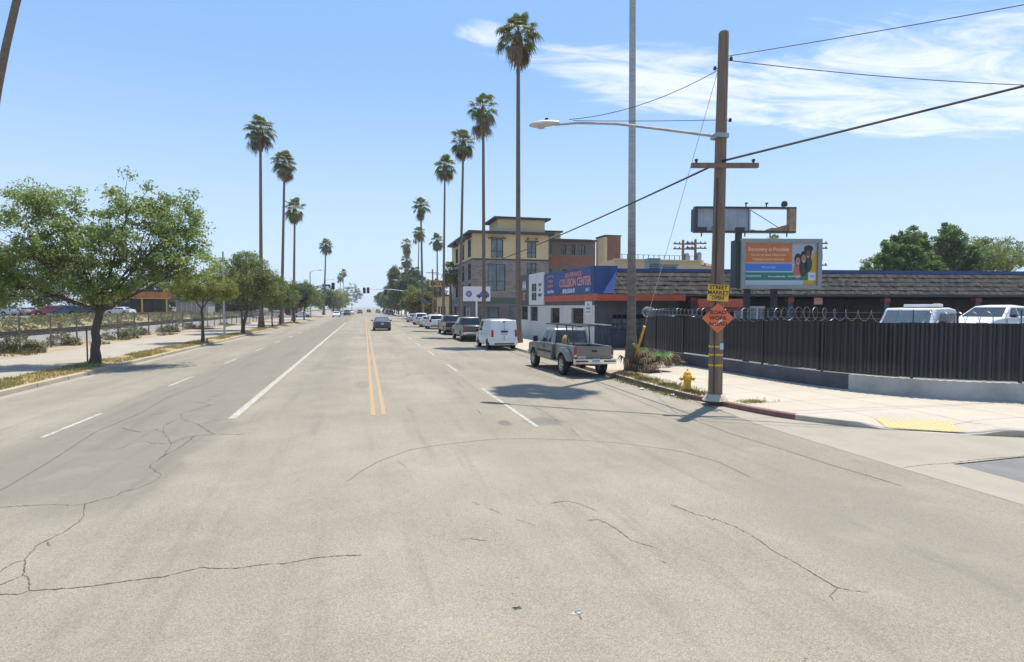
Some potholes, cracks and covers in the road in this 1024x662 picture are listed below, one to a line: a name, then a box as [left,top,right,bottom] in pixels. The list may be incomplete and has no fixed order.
crack [673,505,861,601]
crack [123,396,222,456]
crack [0,429,356,595]
